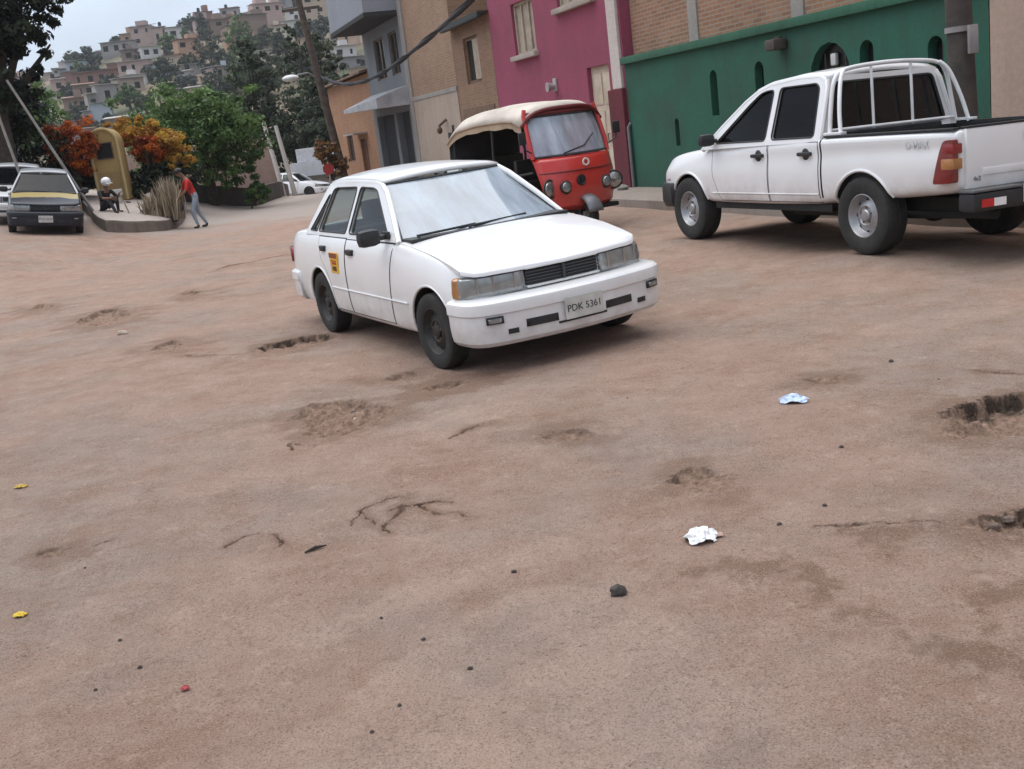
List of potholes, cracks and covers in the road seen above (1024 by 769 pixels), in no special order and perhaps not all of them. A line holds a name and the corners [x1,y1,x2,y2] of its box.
pothole [55,306,155,333]
pothole [236,331,354,358]
pothole [907,388,1024,449]
crack [796,515,949,534]
pothole [268,395,422,445]
crack [58,535,128,556]
crack [335,490,485,541]
pothole [521,424,617,448]
crack [211,528,299,554]
pothole [653,461,752,500]
pothole [130,337,205,358]
crack [434,418,507,443]
